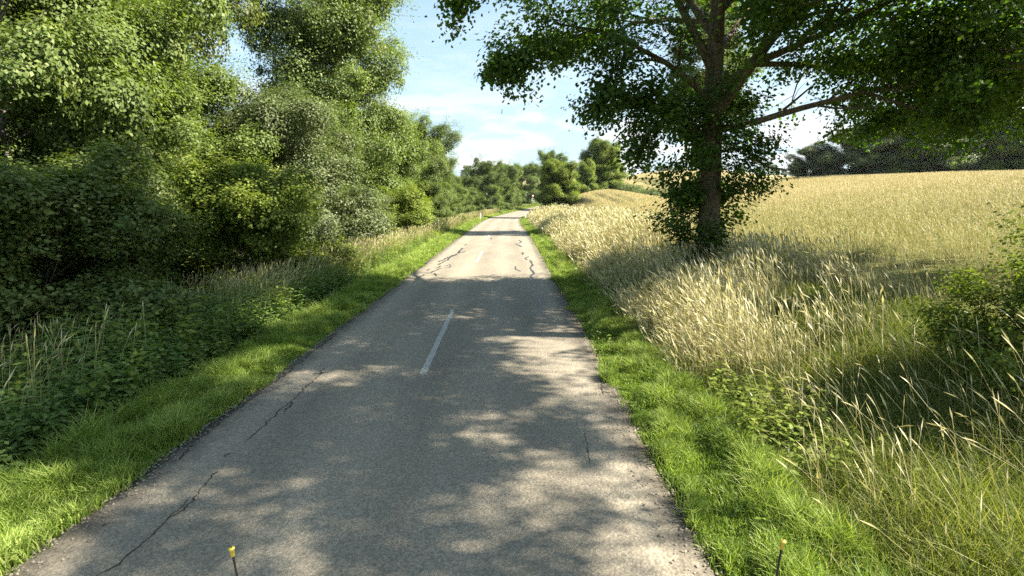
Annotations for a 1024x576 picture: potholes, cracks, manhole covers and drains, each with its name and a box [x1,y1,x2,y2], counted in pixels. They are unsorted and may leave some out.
crack [96,333,336,576]
